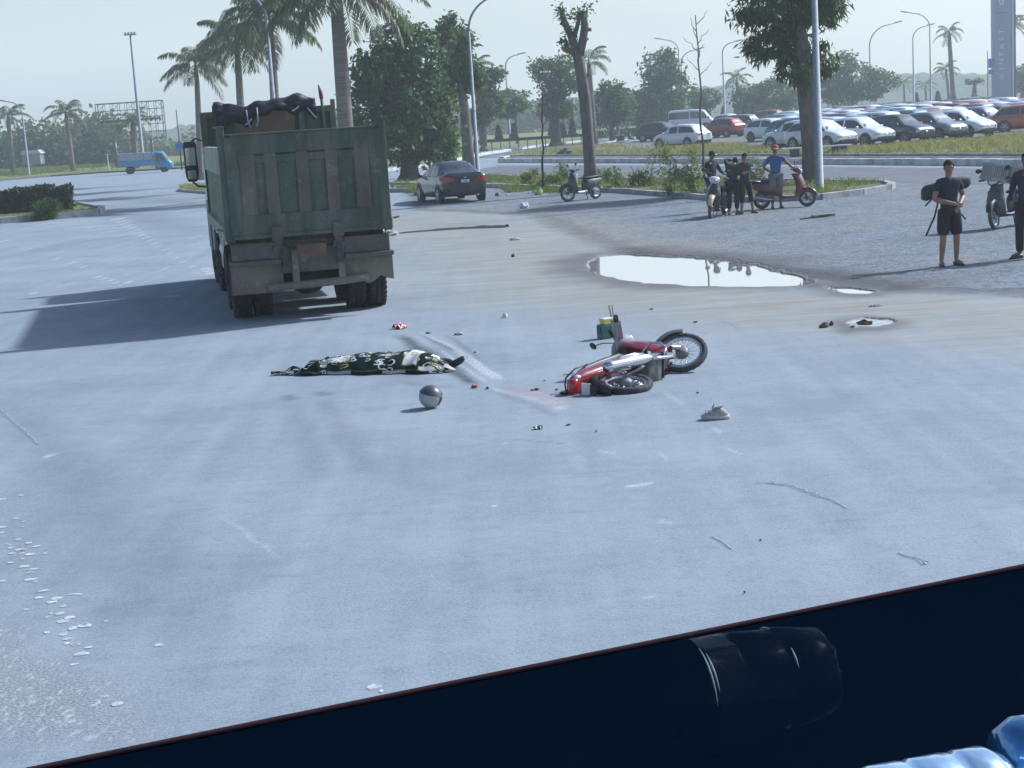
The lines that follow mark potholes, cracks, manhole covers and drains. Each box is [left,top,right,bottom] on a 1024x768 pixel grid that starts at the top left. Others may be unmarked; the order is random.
crack [896,553,927,565]
crack [0,410,38,444]
crack [754,481,847,508]
pothole [581,253,817,288]
crack [710,536,732,549]
